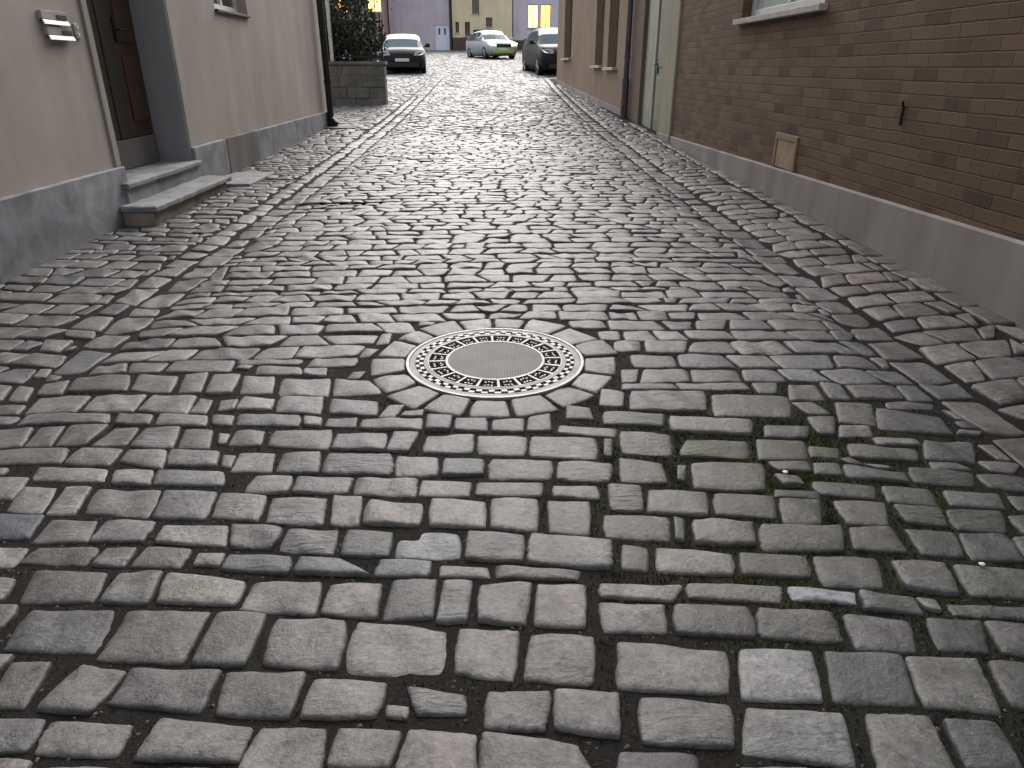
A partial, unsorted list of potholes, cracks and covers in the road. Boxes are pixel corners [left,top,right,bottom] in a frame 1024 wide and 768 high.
manhole cover [406,328,584,401]
